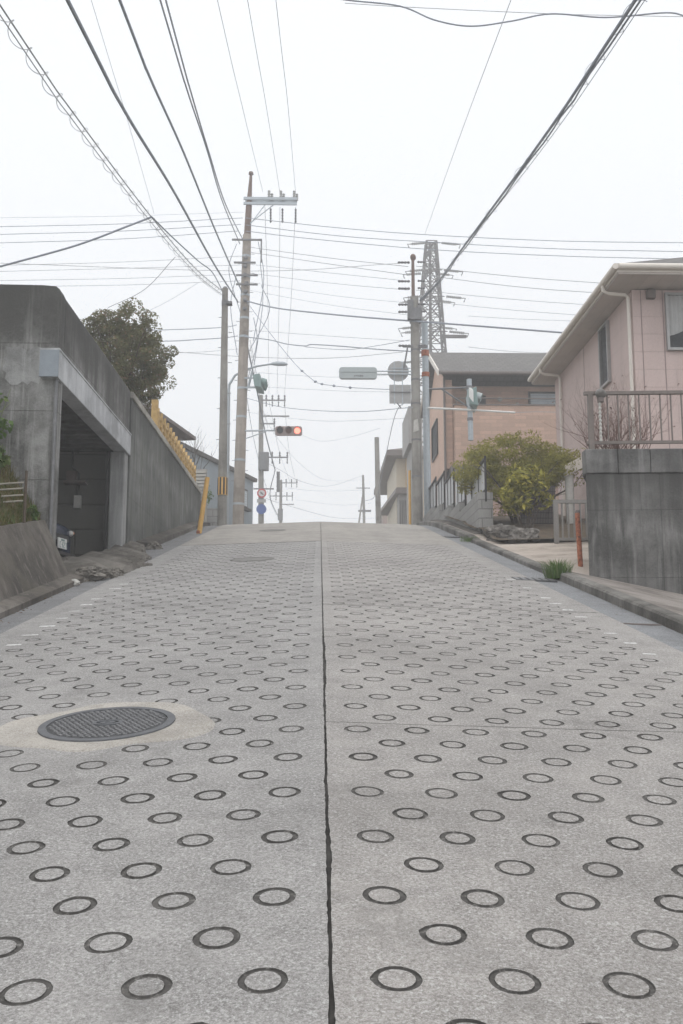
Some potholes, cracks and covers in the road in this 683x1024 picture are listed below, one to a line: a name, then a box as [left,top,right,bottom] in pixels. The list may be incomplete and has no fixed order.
manhole cover [37,707,175,742]
